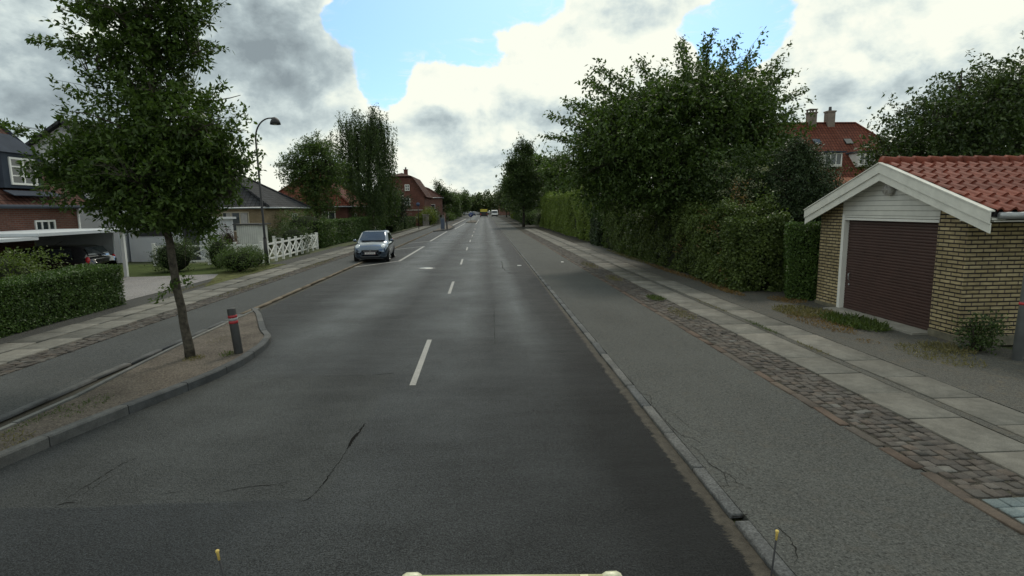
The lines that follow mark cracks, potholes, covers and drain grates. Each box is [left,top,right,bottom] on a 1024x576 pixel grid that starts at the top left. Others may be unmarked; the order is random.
crack [630,379,753,490]
crack [221,424,364,501]
crack [58,461,129,505]
